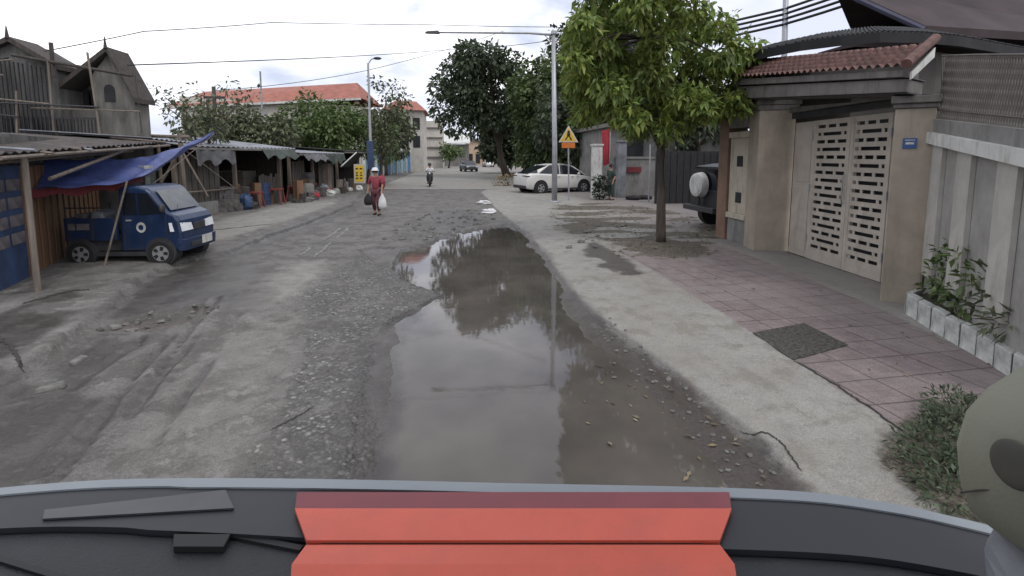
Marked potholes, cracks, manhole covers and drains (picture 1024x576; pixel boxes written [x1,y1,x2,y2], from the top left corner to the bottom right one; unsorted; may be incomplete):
crack [23,289,90,304]
crack [0,337,24,372]
pothole [336,224,775,490]
